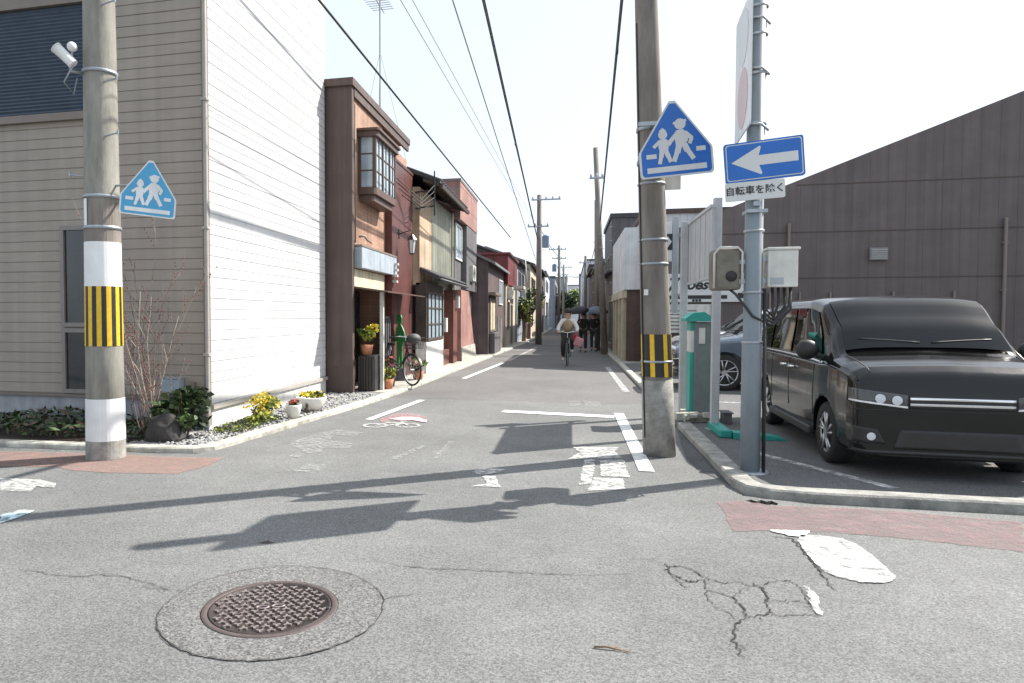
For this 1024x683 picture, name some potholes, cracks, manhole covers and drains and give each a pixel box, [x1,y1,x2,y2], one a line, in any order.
manhole cover [200,581,338,638]
crack [646,536,837,658]
crack [20,565,411,661]
